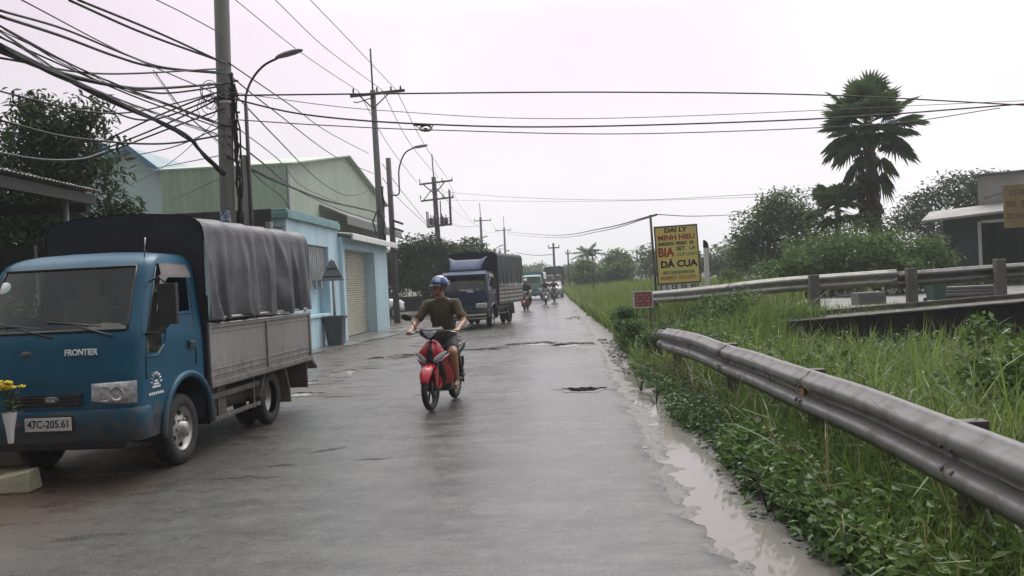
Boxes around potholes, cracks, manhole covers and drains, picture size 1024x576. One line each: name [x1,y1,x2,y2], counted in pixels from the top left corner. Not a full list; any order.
crack [215,447,344,479]
